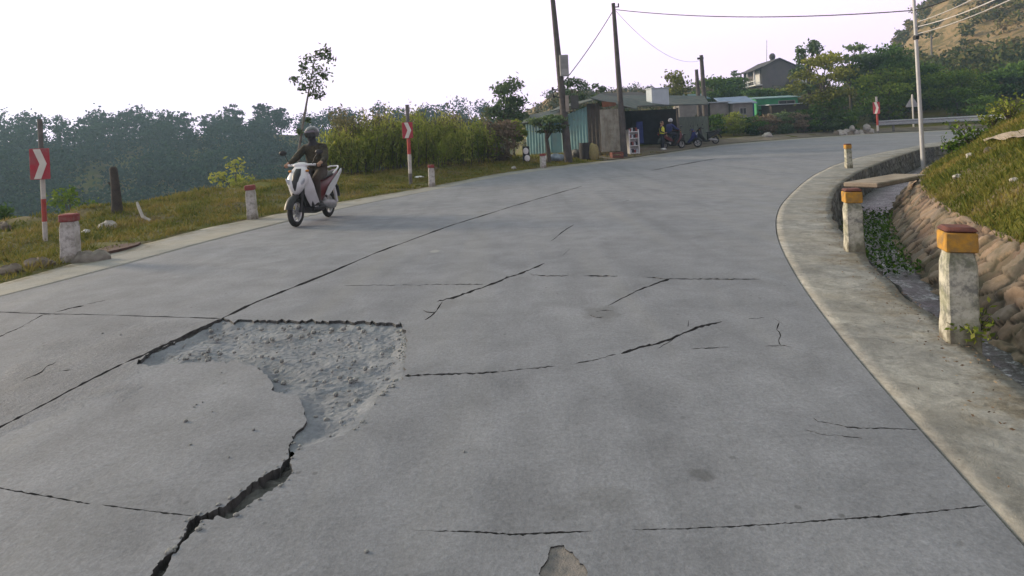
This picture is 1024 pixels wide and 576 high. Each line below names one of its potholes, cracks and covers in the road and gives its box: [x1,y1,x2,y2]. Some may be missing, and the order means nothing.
crack [348,263,750,377]
pothole [539,545,588,576]
pothole [137,318,408,452]
crack [807,418,918,438]
crack [0,448,293,576]
